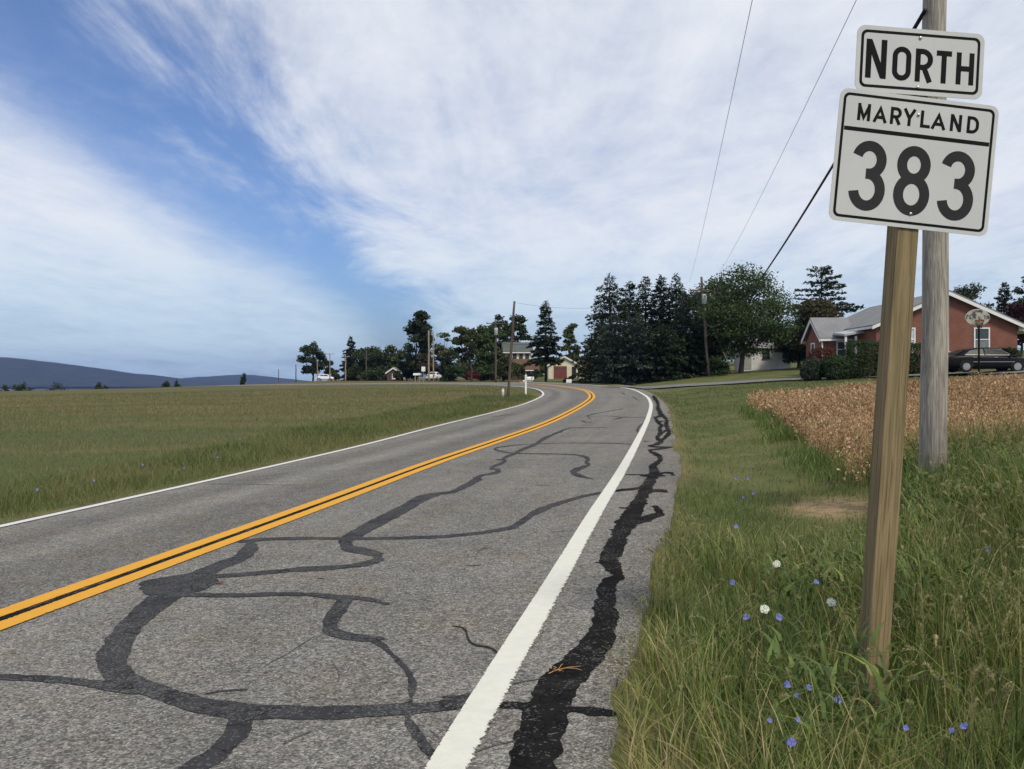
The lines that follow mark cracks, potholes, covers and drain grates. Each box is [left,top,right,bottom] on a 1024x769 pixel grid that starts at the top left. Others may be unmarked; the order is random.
crack [452,625,498,653]
